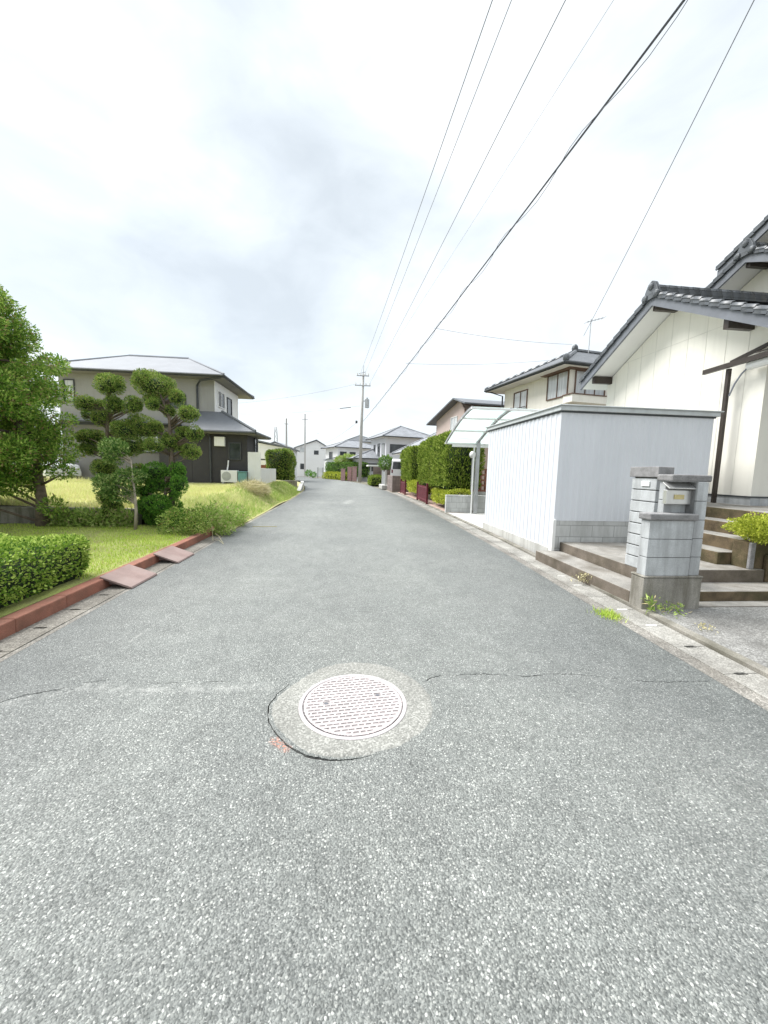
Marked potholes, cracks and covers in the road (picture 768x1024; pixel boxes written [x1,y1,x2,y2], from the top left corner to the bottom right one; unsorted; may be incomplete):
manhole cover [271,662,433,758]
